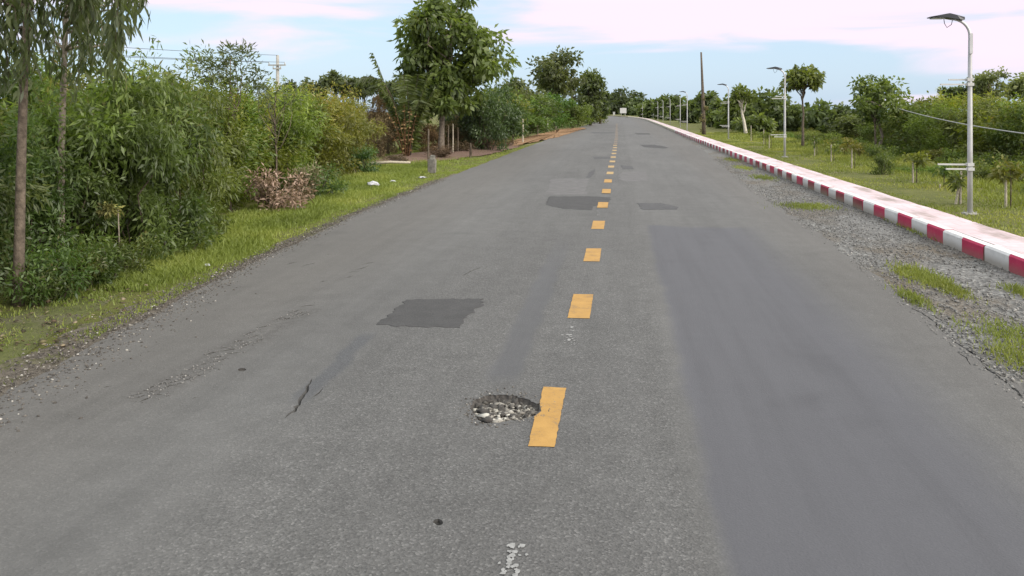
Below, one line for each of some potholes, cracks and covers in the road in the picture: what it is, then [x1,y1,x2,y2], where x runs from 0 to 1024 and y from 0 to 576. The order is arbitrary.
crack [285,380,323,418]
pothole [454,386,555,430]
